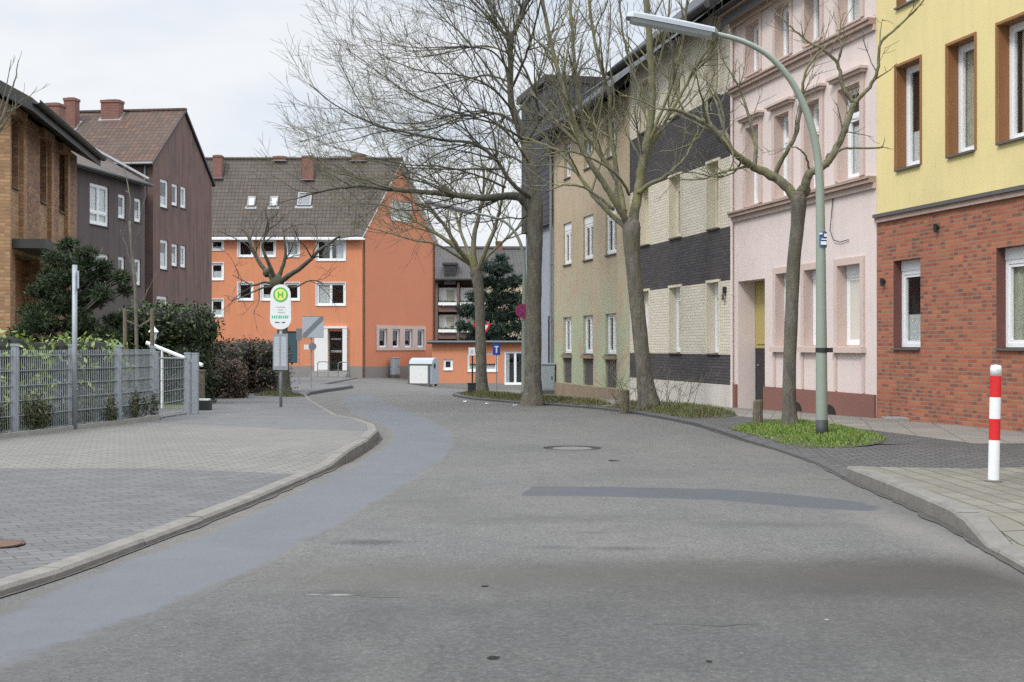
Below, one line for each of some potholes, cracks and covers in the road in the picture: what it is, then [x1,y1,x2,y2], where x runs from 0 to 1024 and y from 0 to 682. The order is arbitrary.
utility cover [0,540,26,549]
